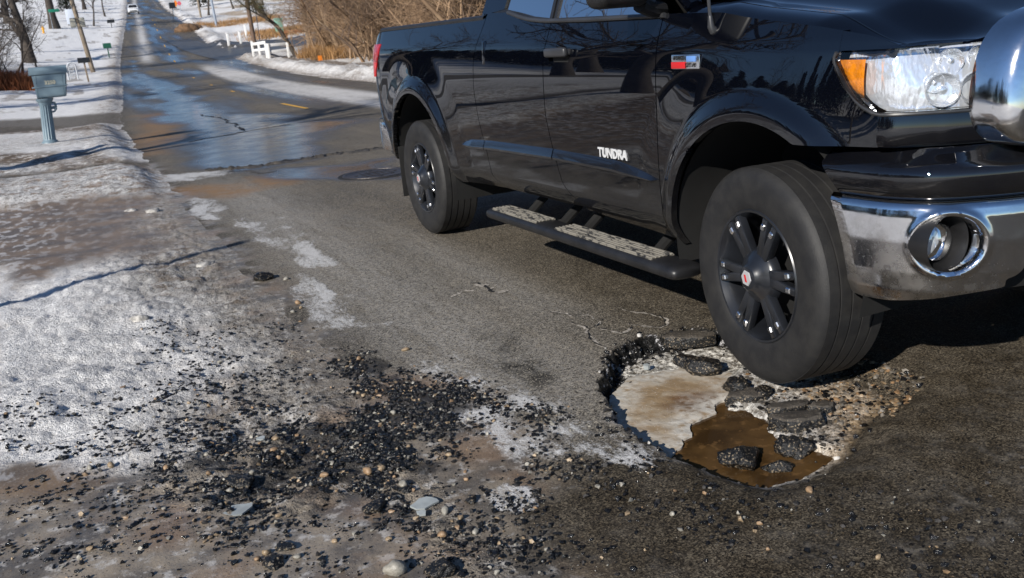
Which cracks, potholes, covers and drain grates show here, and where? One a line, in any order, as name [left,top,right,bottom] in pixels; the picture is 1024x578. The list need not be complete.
crack [451,282,508,297]
manhole cover [338,167,401,181]
crack [190,114,384,172]
crack [551,309,669,349]
pothole [573,317,948,504]
